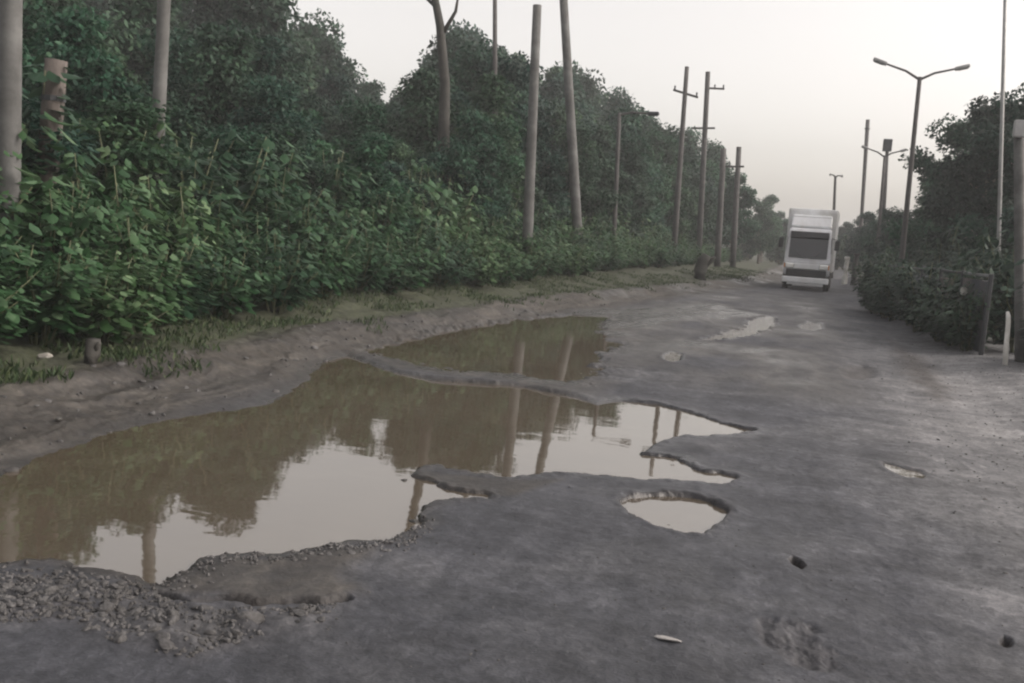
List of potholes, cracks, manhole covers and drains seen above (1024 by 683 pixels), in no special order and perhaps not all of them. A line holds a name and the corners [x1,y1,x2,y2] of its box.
pothole [877,459,934,480]
pothole [697,315,780,341]
pothole [788,556,806,569]
pothole [0,353,761,587]
pothole [360,314,631,384]
pothole [998,635,1015,648]
pothole [750,615,843,674]
pothole [660,350,686,362]
